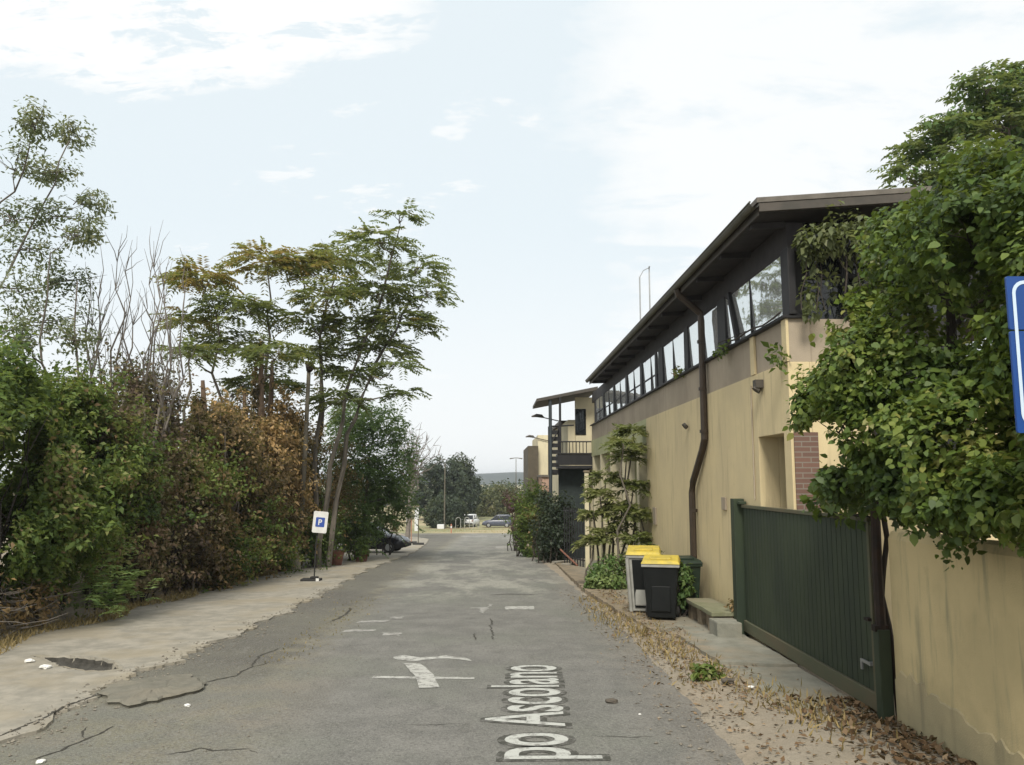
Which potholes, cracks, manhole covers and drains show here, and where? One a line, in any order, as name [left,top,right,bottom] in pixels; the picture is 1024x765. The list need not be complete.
pothole [31,654,125,672]
crack [32,726,113,760]
crack [165,747,258,755]
crack [207,647,282,682]
crack [0,694,100,736]
